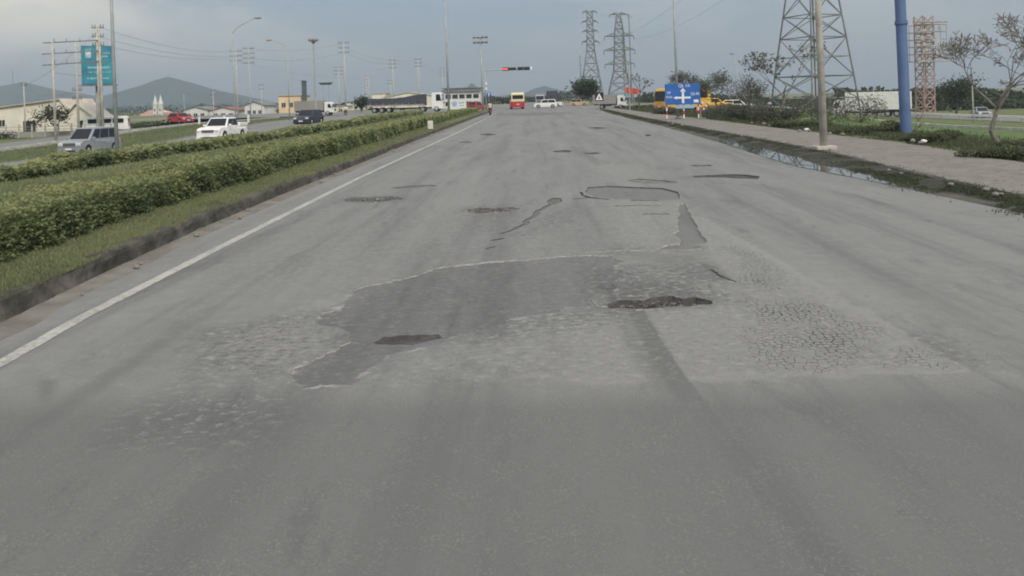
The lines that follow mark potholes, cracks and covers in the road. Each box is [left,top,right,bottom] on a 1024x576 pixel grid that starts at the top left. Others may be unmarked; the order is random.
pothole [373,334,442,345]
crack [709,235,961,376]
crack [486,205,551,249]
pothole [607,296,713,309]
